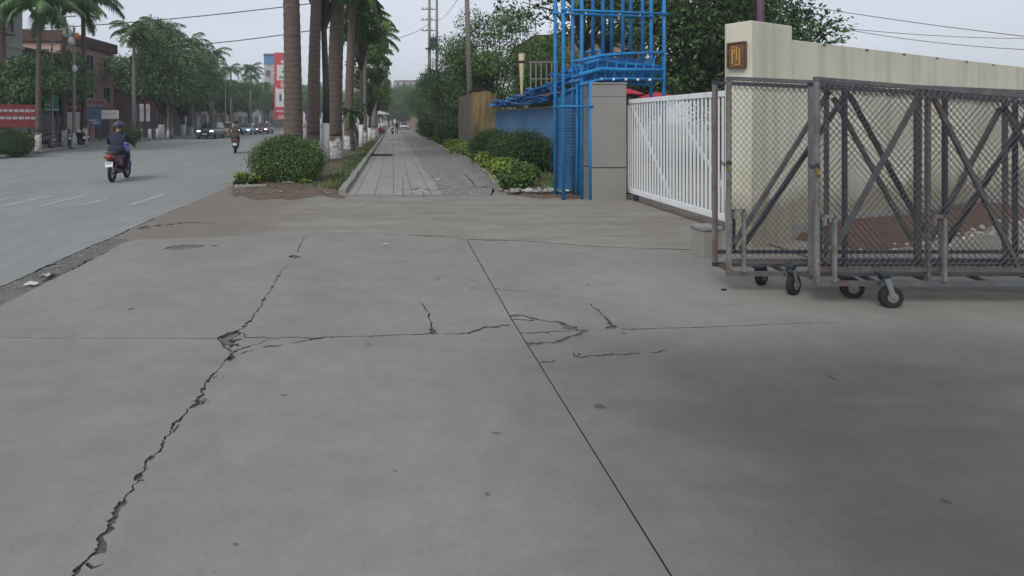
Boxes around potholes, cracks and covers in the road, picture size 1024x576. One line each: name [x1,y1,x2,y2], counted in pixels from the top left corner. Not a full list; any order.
crack [2,238,840,576]
